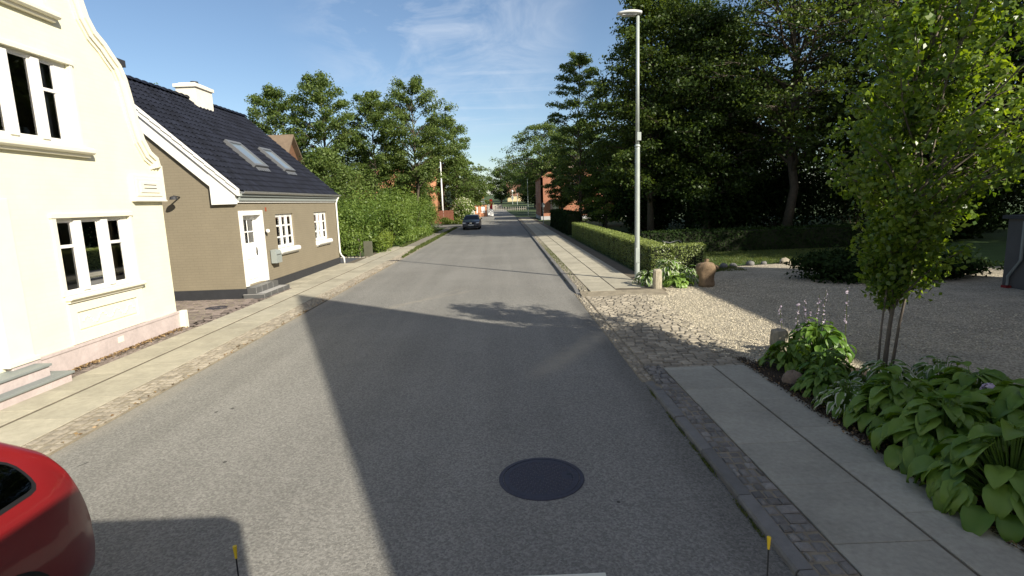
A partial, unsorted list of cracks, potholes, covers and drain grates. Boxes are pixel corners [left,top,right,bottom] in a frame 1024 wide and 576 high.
manhole cover [499,457,584,501]
